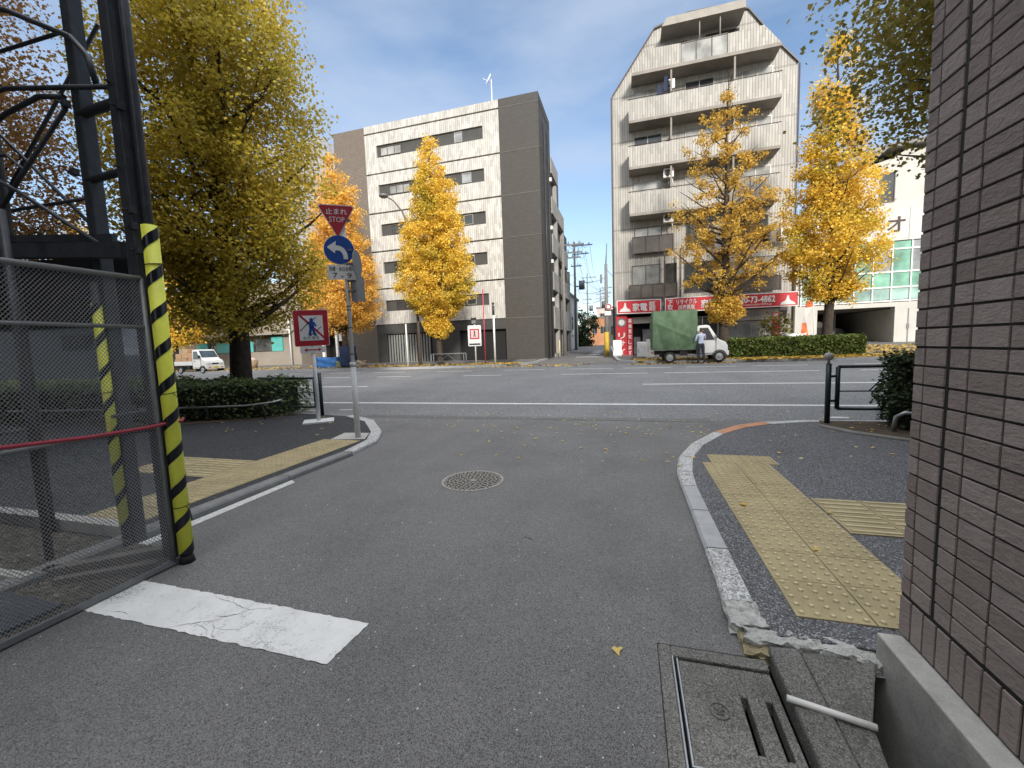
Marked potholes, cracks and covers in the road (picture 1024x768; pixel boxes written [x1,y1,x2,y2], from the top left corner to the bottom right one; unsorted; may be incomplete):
manhole cover [442,471,504,492]
